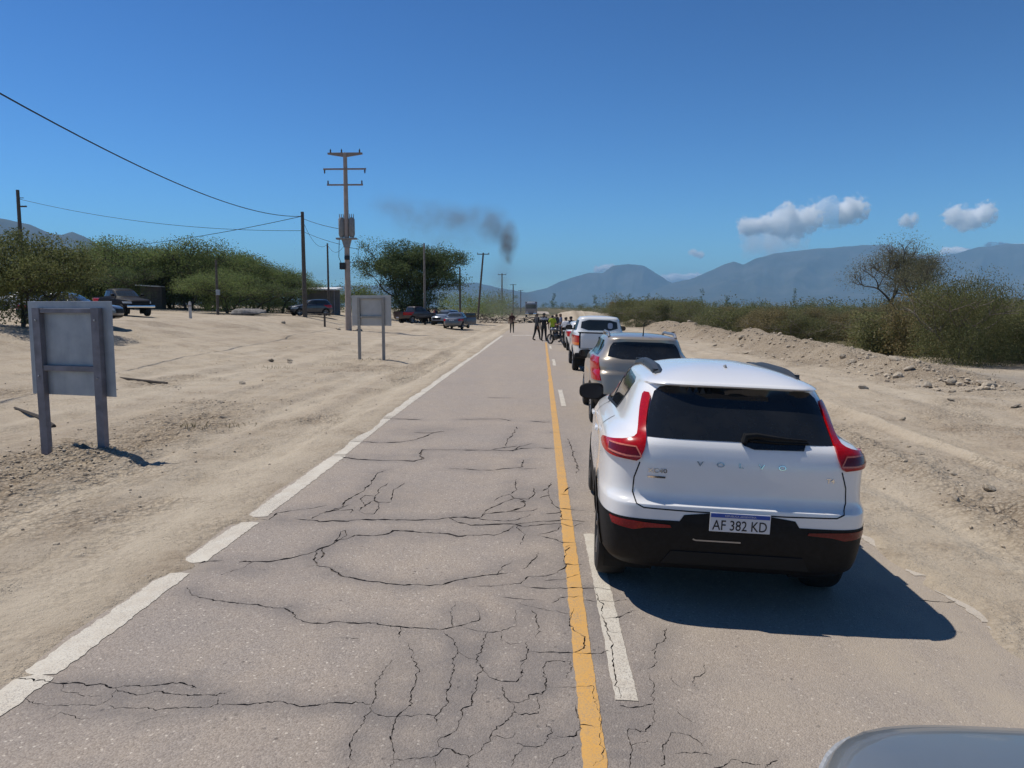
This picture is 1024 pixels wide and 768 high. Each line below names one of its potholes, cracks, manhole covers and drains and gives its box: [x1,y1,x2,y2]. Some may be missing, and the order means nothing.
crack [202,418,778,768]
crack [25,679,366,720]
